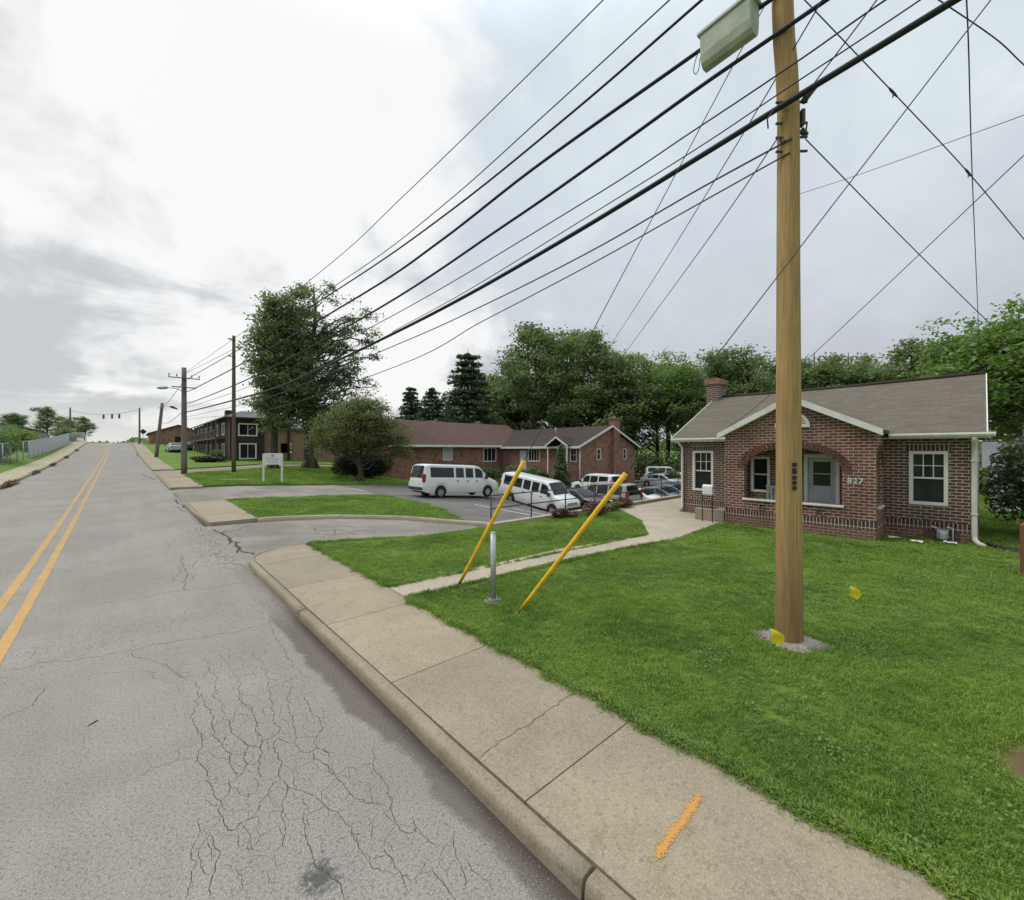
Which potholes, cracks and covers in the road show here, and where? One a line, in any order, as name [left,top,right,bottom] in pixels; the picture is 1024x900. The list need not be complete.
crack [478,695,572,759]
crack [120,627,492,900]
crack [98,525,255,604]
